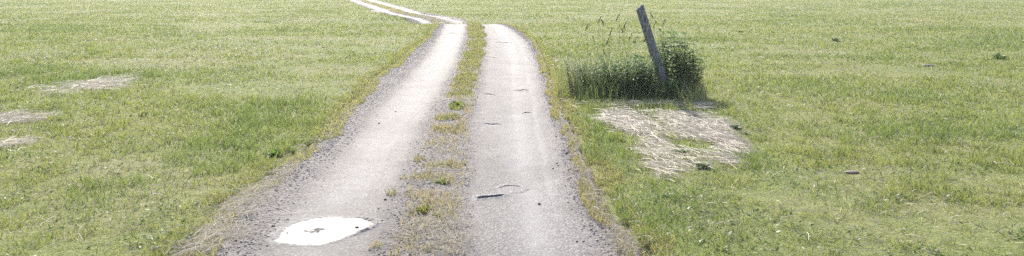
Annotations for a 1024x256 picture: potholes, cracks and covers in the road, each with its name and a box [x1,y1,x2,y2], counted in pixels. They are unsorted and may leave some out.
pothole [265,215,383,247]
